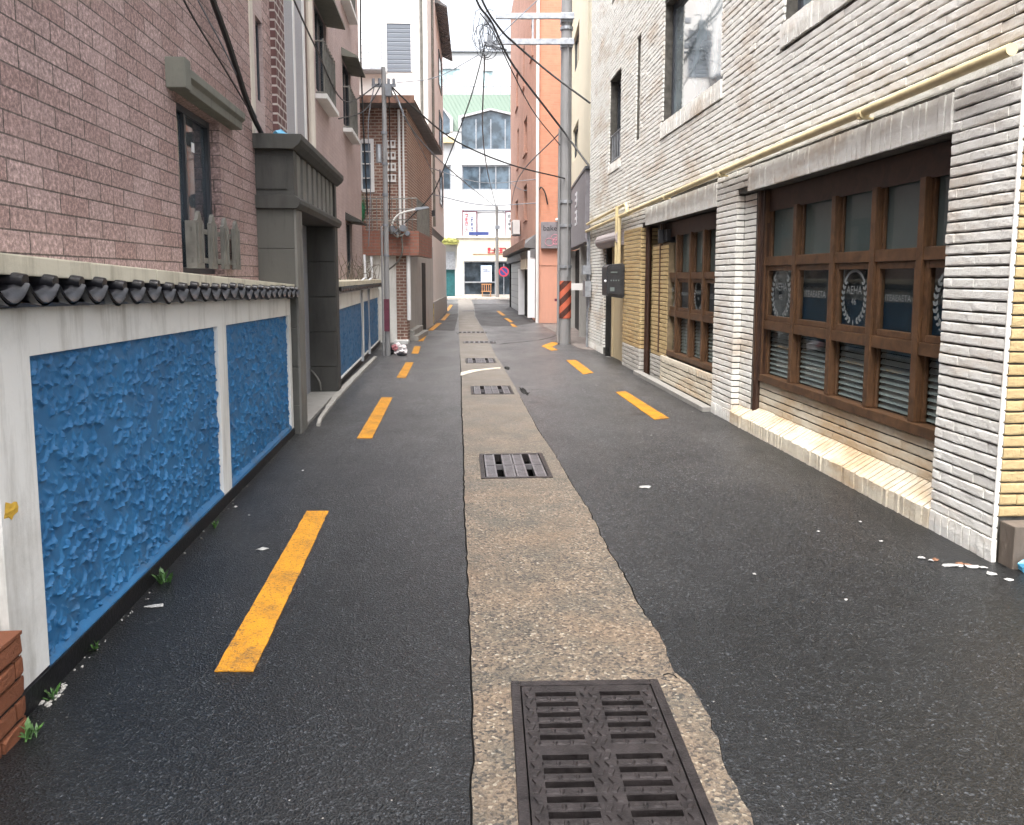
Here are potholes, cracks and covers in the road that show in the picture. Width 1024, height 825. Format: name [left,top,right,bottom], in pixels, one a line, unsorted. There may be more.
drain grate [511,679,719,825]
drain grate [470,385,514,395]
drain grate [479,453,553,479]
